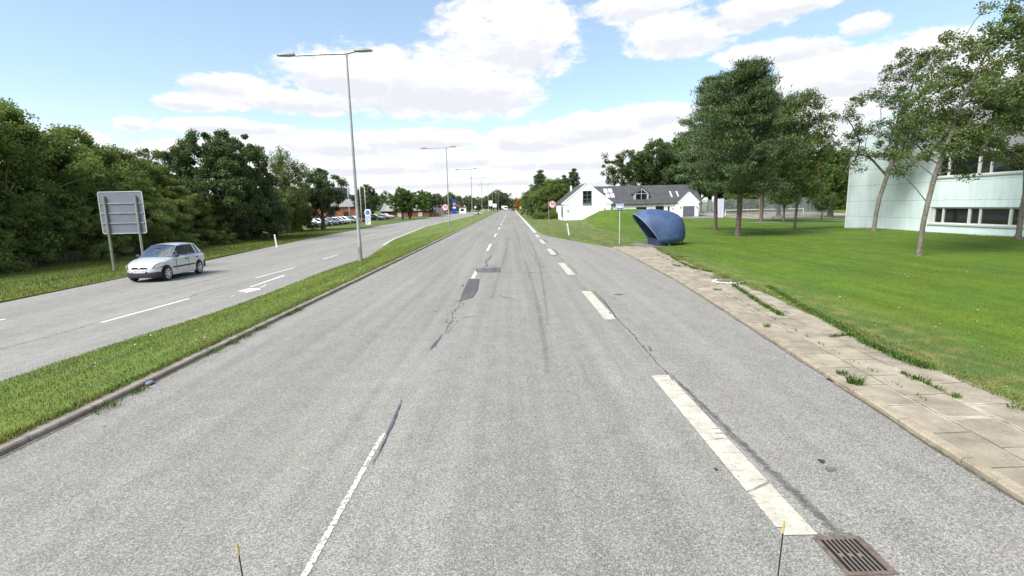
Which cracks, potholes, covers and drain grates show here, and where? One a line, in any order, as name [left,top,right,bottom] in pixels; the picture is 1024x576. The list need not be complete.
drain grate [813,536,899,576]
